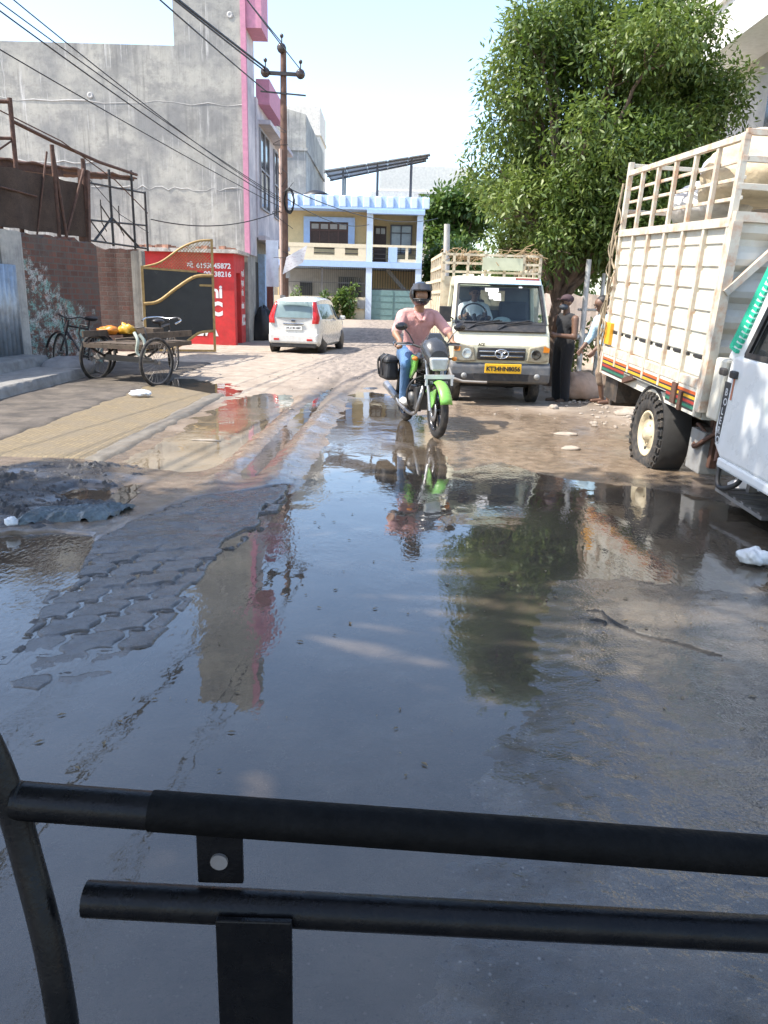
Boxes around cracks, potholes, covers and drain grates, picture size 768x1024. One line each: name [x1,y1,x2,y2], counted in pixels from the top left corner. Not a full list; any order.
crack [586,609,722,656]
